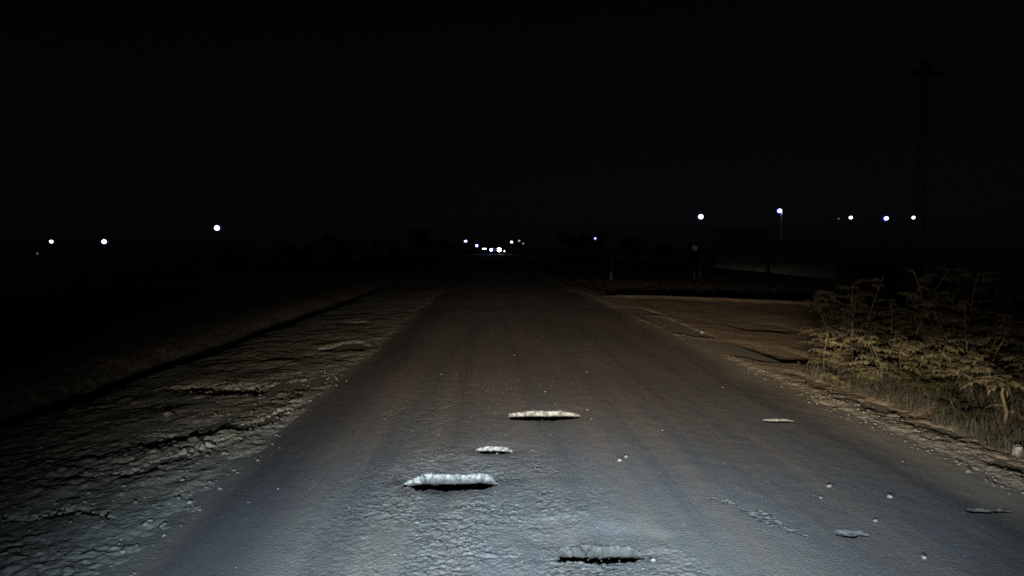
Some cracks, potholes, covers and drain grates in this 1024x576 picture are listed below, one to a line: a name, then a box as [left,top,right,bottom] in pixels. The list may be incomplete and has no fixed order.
crack [85,374,340,478]
pothole [475,446,513,454]
crack [704,497,811,538]
pothole [507,410,581,421]
crack [0,503,118,523]
pothole [317,340,373,352]
pothole [401,473,499,492]
pothole [554,544,645,565]
pothole [831,528,878,538]
